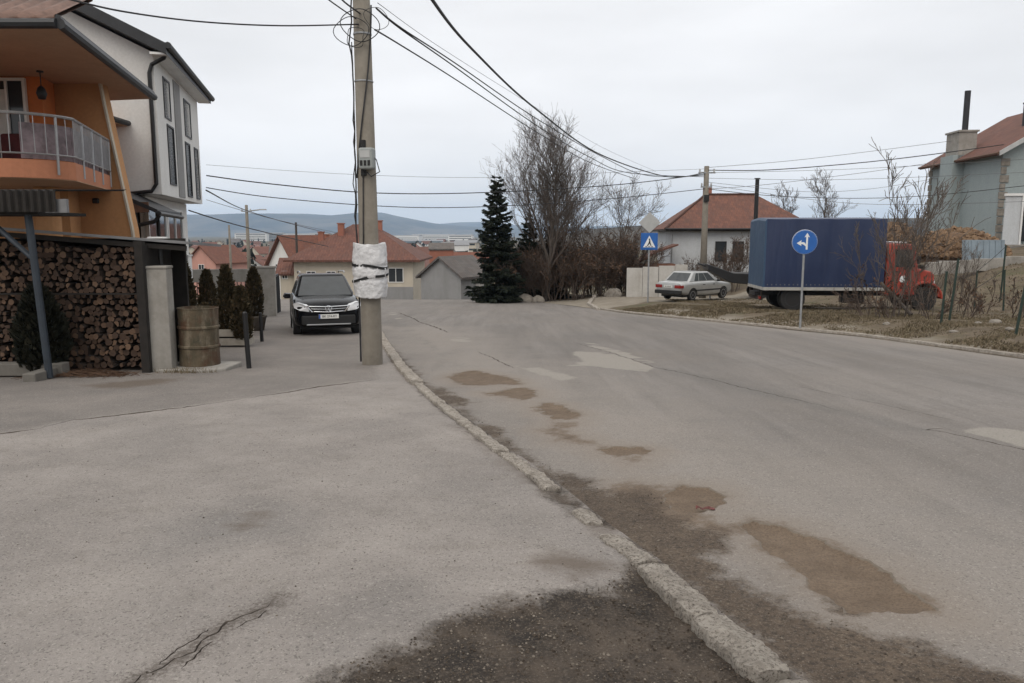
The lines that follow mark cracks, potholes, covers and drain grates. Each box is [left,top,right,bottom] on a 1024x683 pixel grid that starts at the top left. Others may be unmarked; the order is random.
crack [134,605,269,683]
